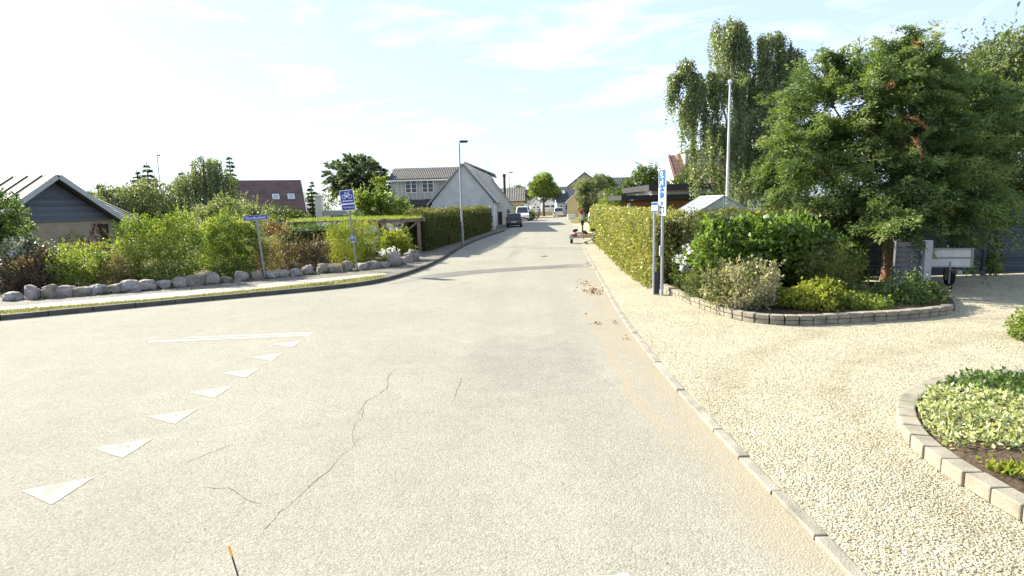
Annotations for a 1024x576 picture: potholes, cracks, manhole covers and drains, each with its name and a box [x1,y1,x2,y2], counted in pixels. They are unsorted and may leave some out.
crack [253,370,394,543]
